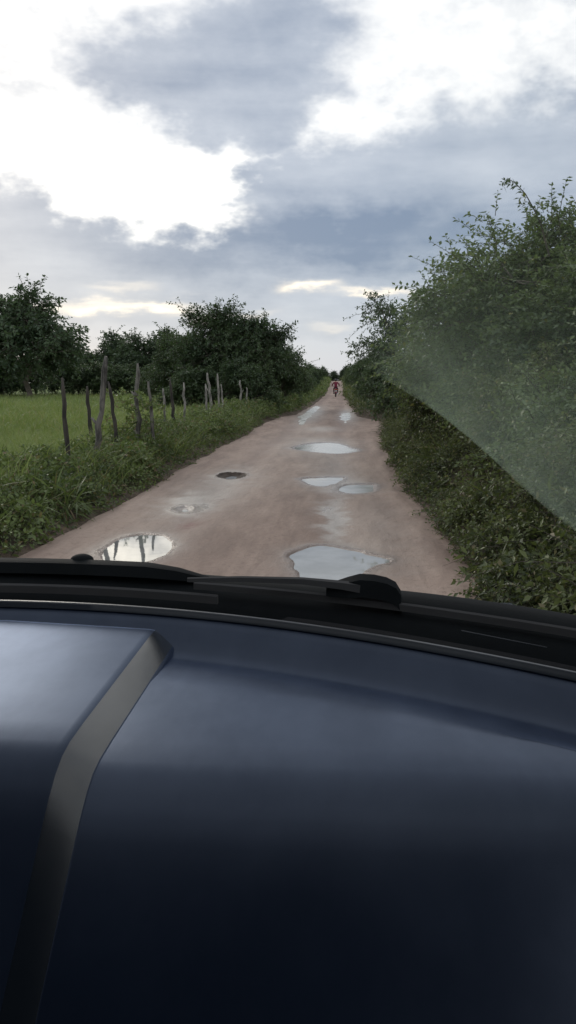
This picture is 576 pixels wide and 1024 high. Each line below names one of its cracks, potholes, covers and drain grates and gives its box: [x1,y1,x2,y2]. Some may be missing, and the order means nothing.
pothole [339,412,355,423]
pothole [293,442,359,454]
pothole [336,483,378,494]
pothole [286,544,394,580]
pothole [297,477,344,486]
pothole [295,406,320,425]
pothole [97,533,175,562]
